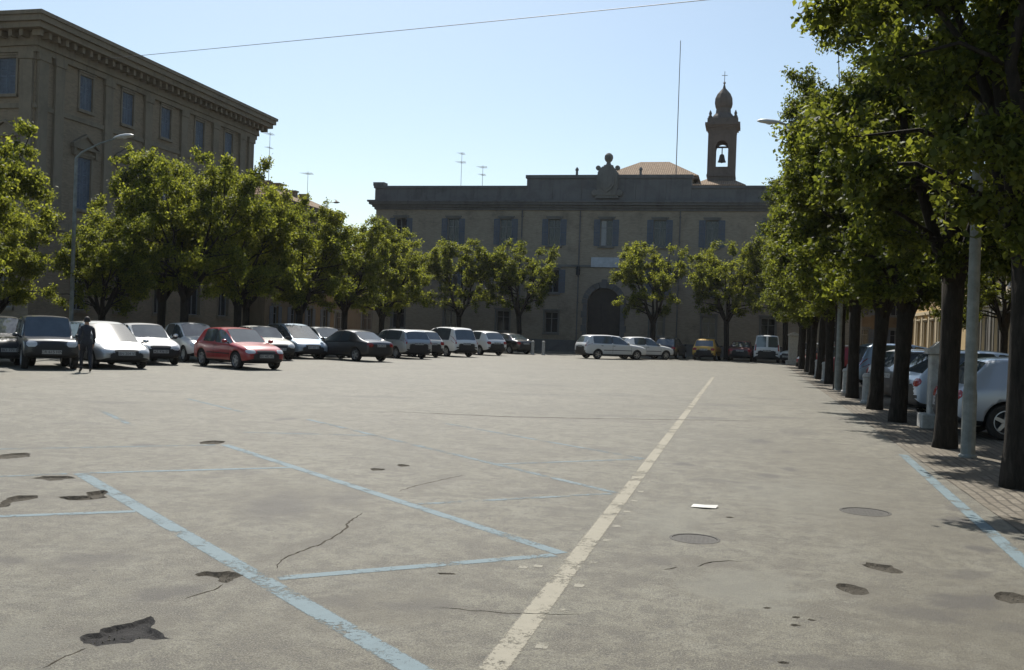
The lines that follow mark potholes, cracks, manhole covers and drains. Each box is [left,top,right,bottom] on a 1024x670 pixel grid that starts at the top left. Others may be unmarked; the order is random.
manhole cover [669,533,721,544]
pothole [60,490,108,500]
pothole [994,592,1024,604]
pothole [862,562,903,574]
crack [43,648,86,668]
crack [185,513,362,599]
manhole cover [839,507,892,516]
pothole [836,583,869,595]
pothole [0,495,38,508]
pothole [195,571,243,583]
pothole [79,616,173,646]
